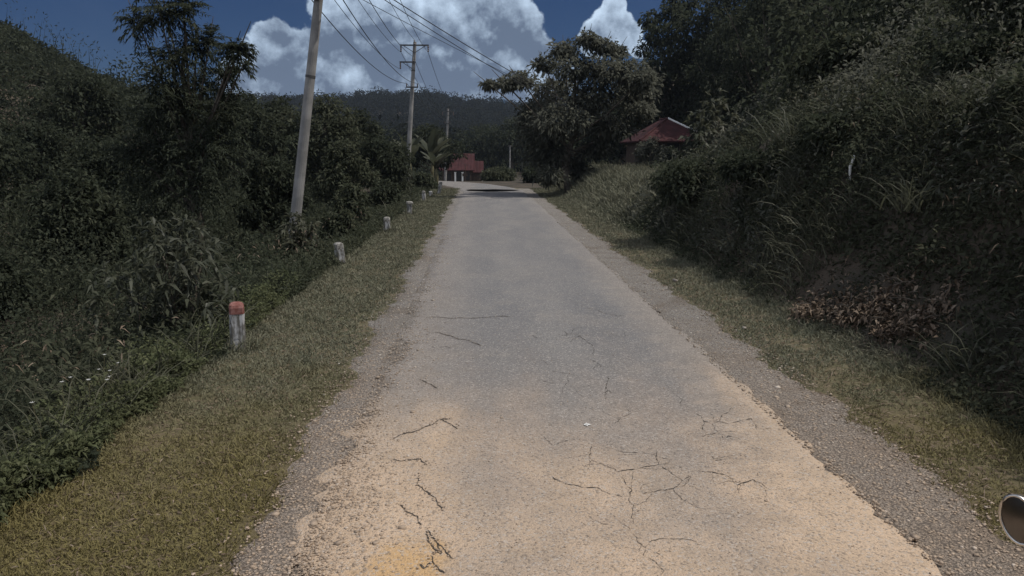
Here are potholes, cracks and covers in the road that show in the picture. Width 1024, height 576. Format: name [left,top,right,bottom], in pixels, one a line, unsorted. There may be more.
crack [536,308,630,423]
crack [541,434,767,576]
crack [426,315,509,358]
crack [390,417,459,440]
crack [391,457,456,575]
crack [673,393,784,447]
